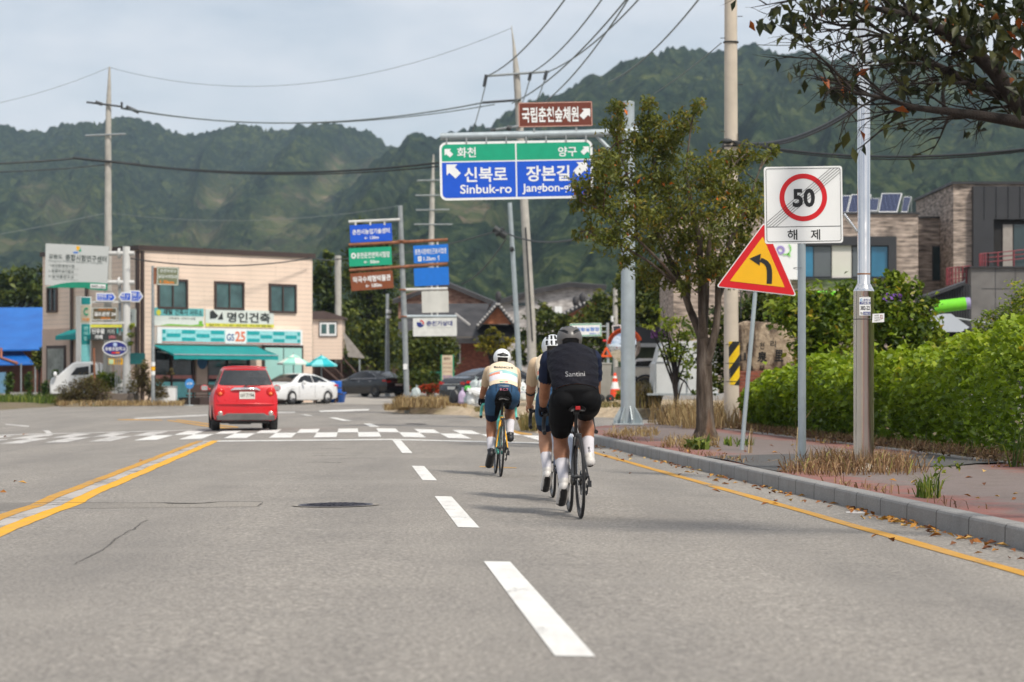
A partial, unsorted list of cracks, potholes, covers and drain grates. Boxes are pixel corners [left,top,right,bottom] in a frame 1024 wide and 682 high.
crack [74,519,149,564]
